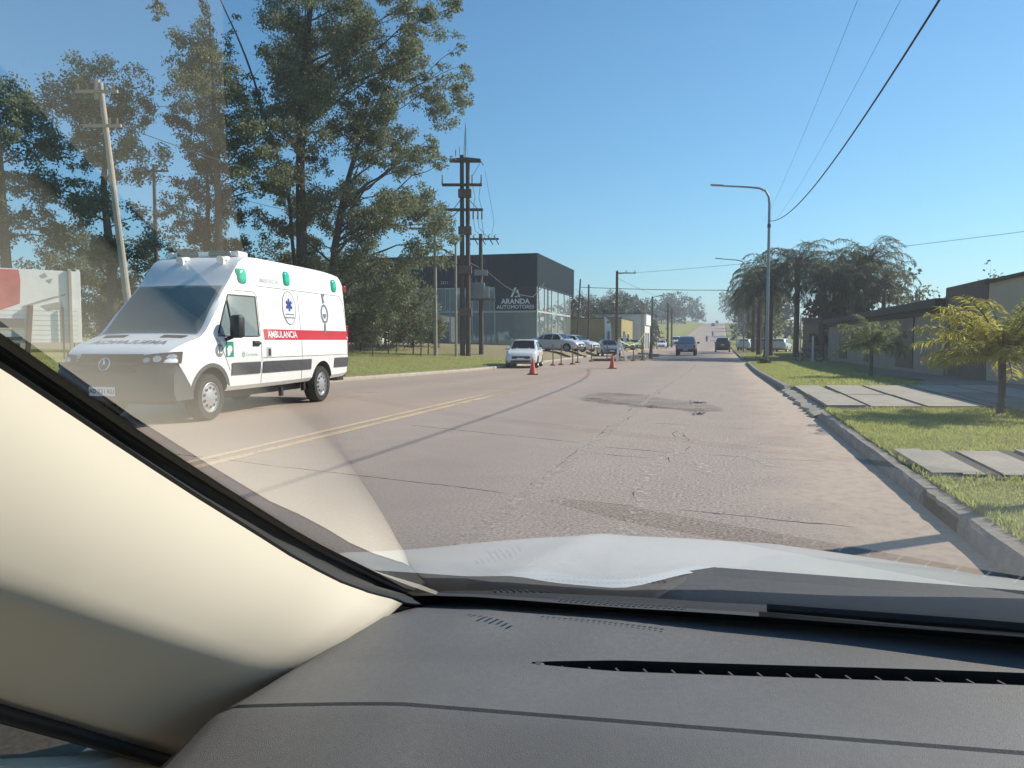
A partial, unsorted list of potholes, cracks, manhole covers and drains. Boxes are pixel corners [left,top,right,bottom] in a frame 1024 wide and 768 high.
crack [549,423,849,536]
